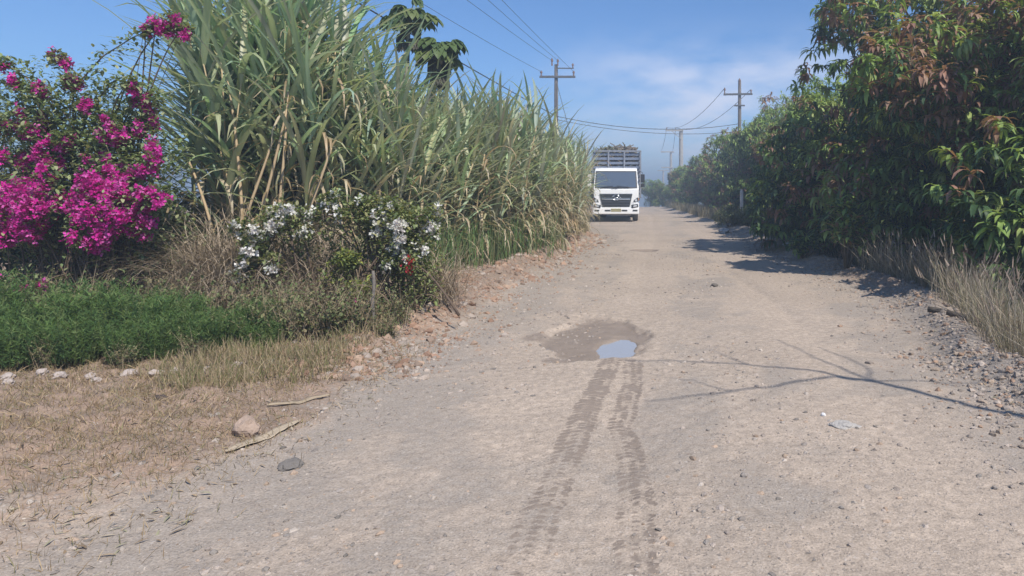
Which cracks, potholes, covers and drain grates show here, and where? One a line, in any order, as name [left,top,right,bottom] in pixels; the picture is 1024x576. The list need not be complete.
pothole [533,312,657,363]
